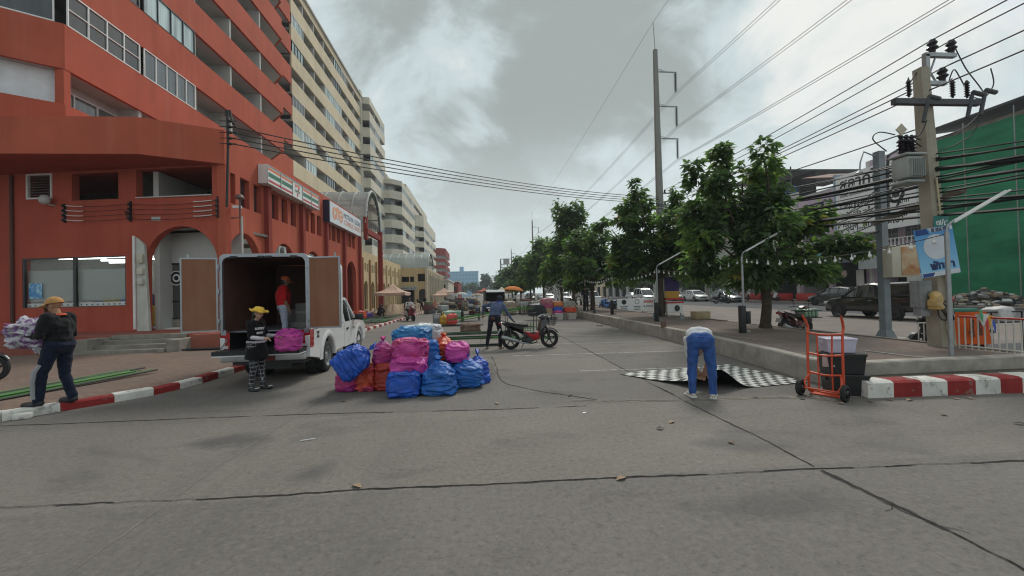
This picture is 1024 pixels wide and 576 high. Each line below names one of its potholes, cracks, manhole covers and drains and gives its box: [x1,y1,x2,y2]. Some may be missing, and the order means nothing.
crack [820,470,1024,570]
crack [491,356,596,400]
